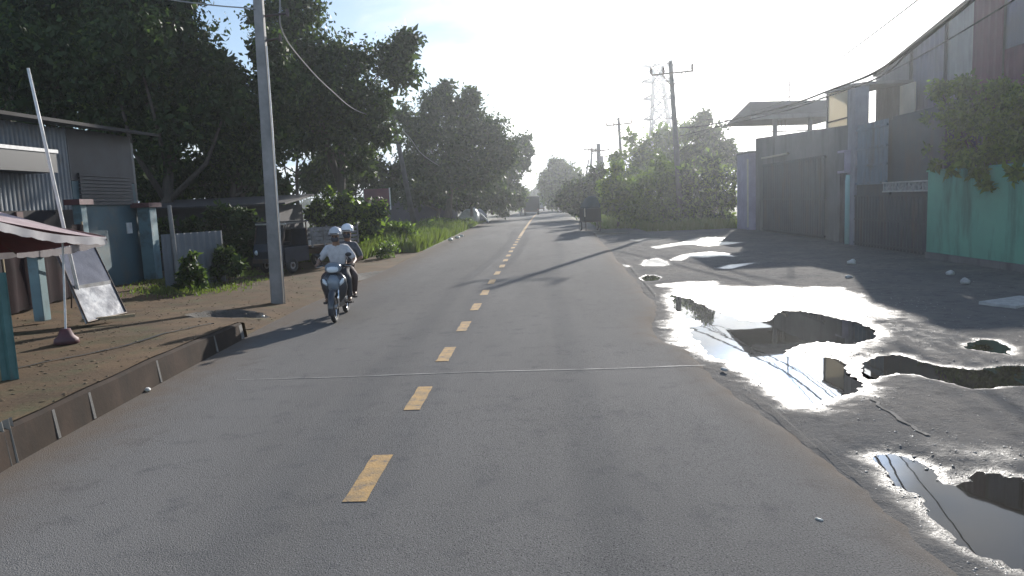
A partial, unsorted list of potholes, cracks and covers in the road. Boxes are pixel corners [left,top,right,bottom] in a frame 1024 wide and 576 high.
pothole [656,291,903,413]
pothole [952,334,1024,356]
crack [869,398,930,435]
pothole [855,348,1024,390]
pothole [844,443,1024,576]
